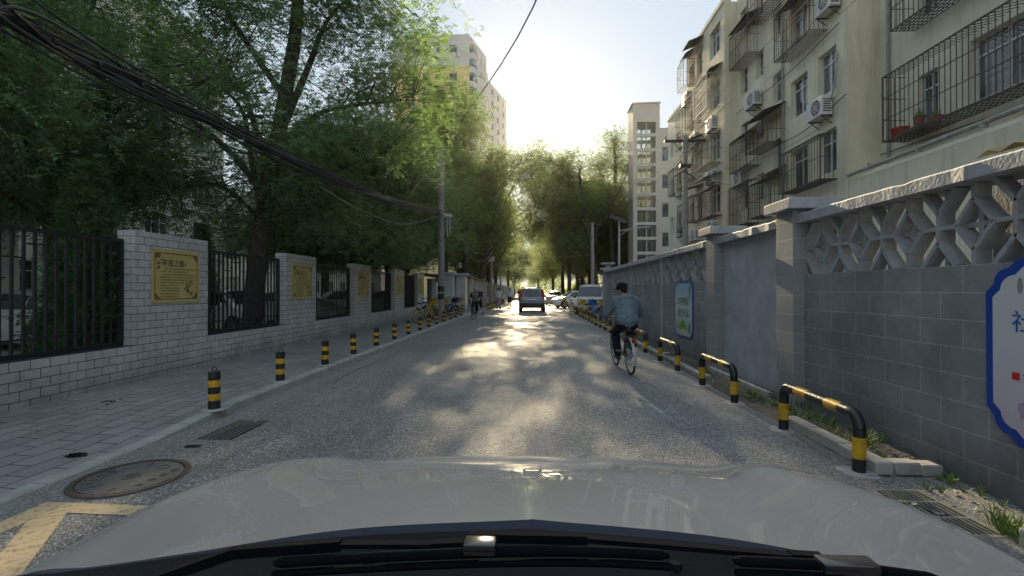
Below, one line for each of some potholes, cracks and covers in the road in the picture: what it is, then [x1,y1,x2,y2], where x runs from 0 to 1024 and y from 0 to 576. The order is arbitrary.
drain grate [868,488,1011,538]
drain grate [190,419,275,442]
manhole cover [63,459,192,499]
